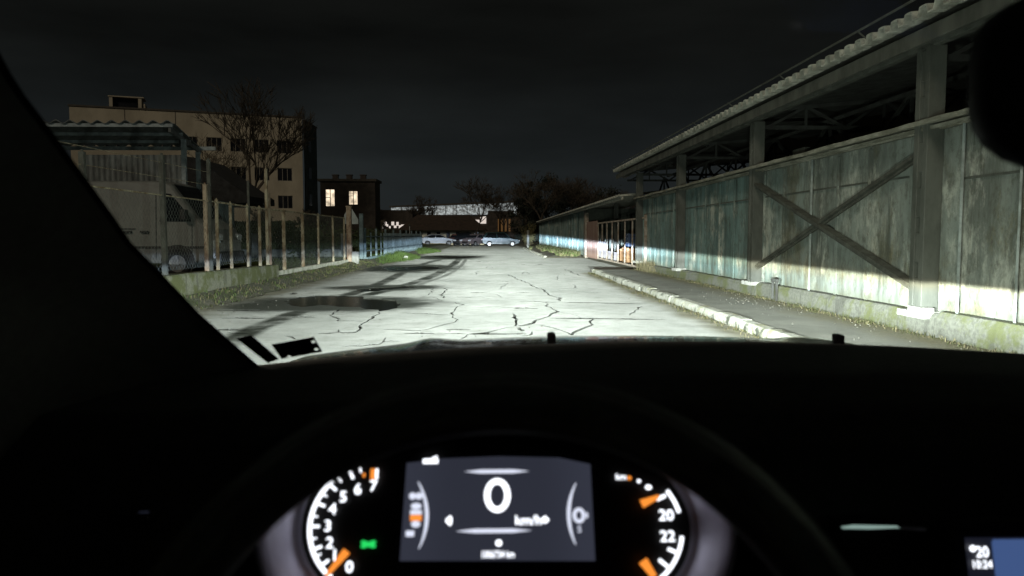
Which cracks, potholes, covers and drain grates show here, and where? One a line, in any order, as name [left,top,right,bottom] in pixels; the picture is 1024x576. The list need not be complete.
pothole [287,295,401,311]
crack [217,310,256,334]
crack [302,261,654,347]
